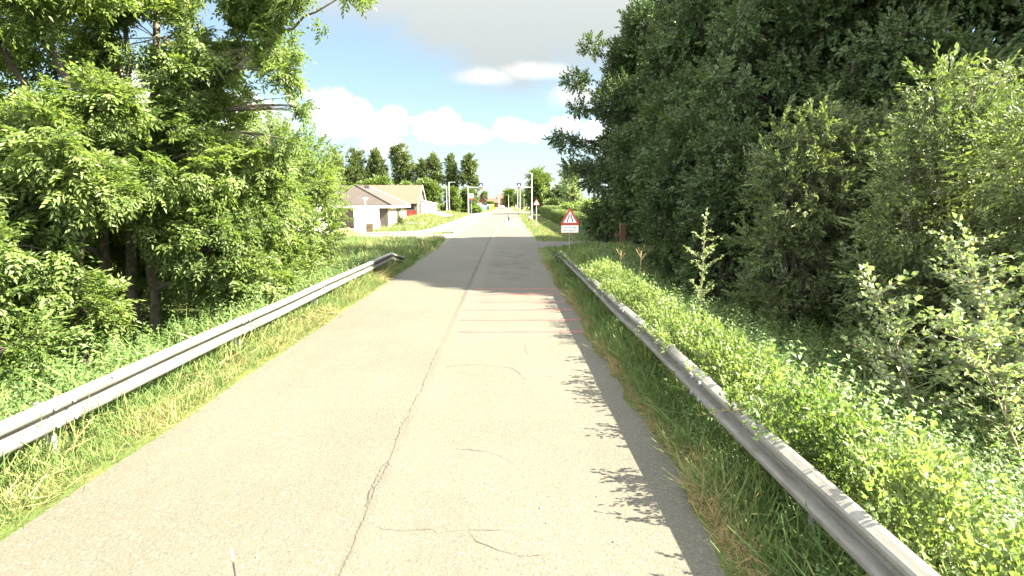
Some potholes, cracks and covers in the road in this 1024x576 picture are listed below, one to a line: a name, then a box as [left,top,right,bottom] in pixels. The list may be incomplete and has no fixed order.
crack [339,345,542,576]
